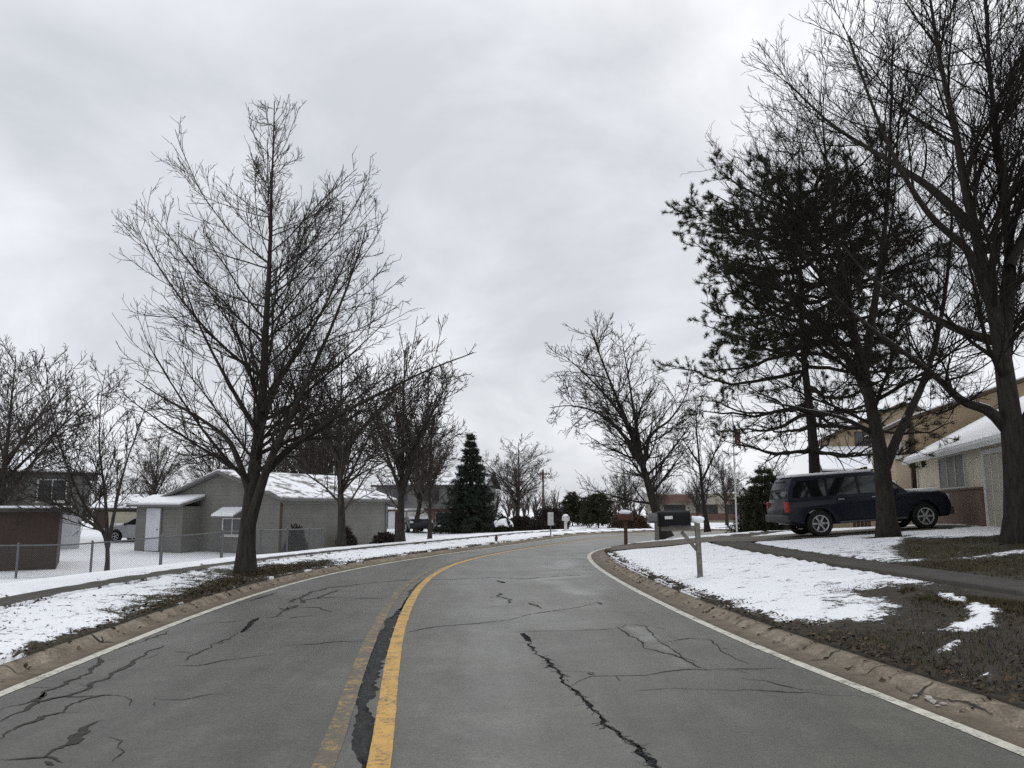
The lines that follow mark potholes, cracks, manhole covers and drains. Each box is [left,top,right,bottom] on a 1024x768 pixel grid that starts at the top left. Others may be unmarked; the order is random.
crack [0,573,602,765]
crack [516,624,852,768]
